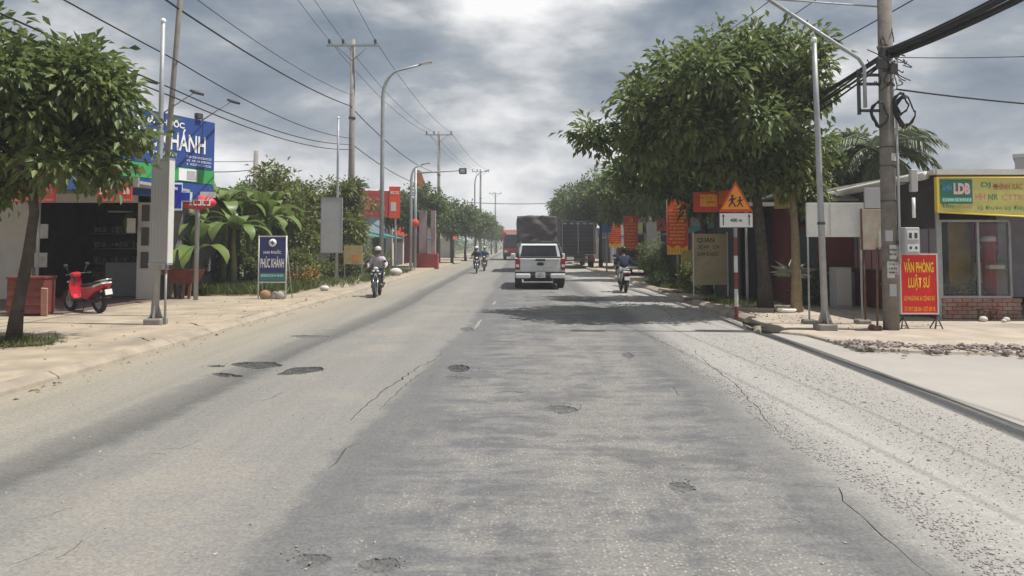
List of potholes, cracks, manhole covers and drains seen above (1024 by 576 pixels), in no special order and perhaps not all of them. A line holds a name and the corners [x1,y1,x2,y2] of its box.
crack [796,484,932,576]
crack [350,356,439,421]
pothole [208,330,696,576]
crack [695,352,789,441]
